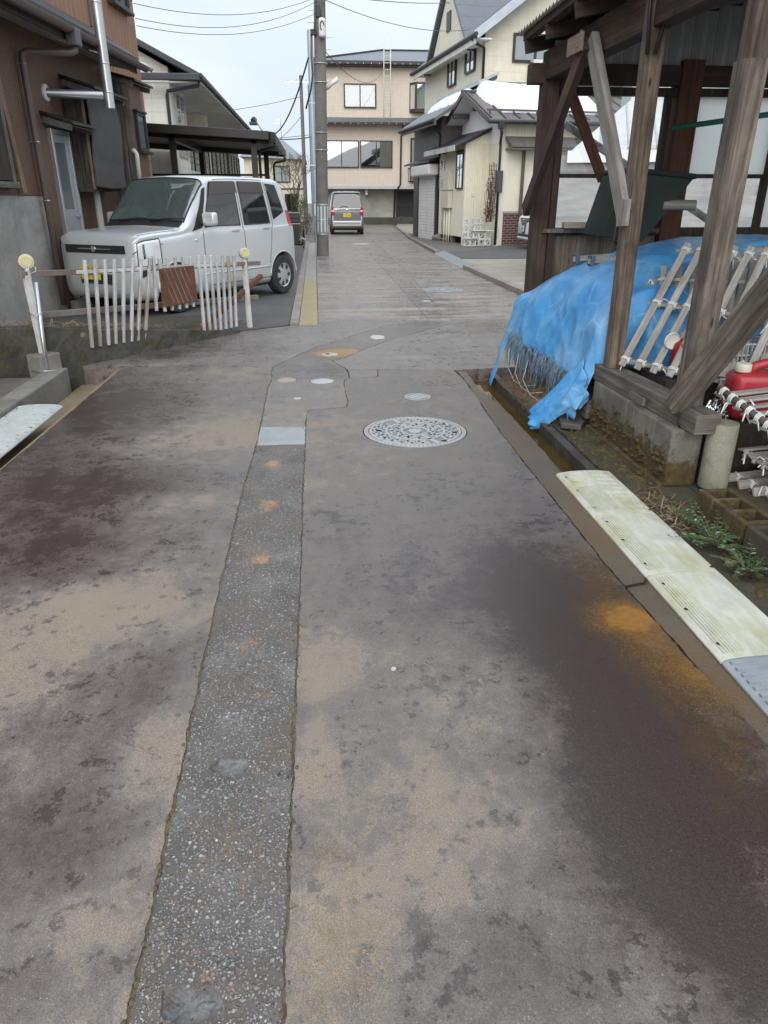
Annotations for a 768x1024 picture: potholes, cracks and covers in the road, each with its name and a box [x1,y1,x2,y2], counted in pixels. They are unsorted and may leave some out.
manhole cover [364,417,466,448]
